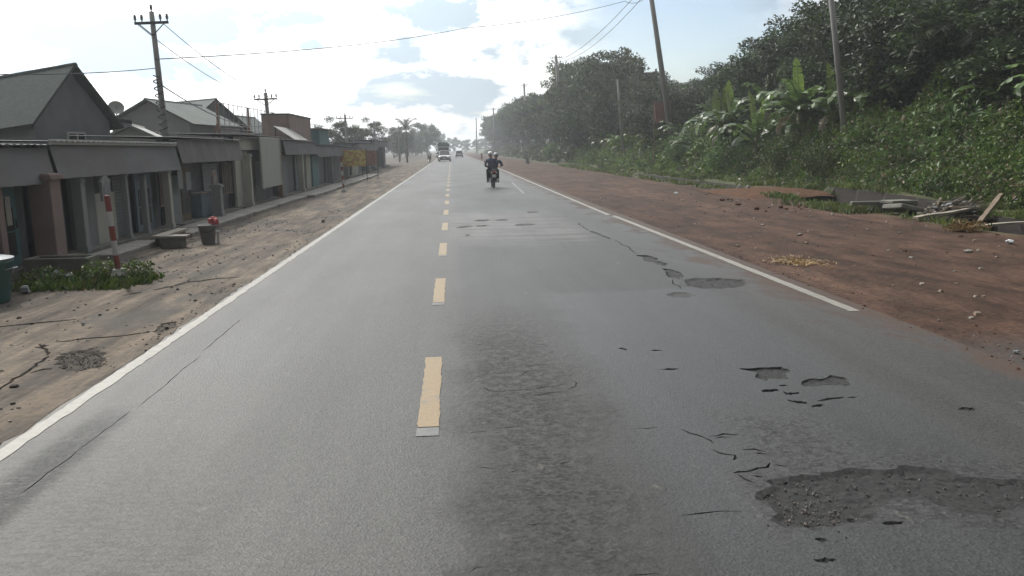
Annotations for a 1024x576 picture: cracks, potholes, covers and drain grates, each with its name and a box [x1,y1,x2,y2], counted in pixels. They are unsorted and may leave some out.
pothole [636,255,668,266]
pothole [678,277,750,289]
pothole [755,461,1024,538]
pothole [663,269,684,279]
pothole [740,367,790,382]
pothole [801,375,851,387]
pothole [48,347,114,371]
crack [681,429,786,483]
